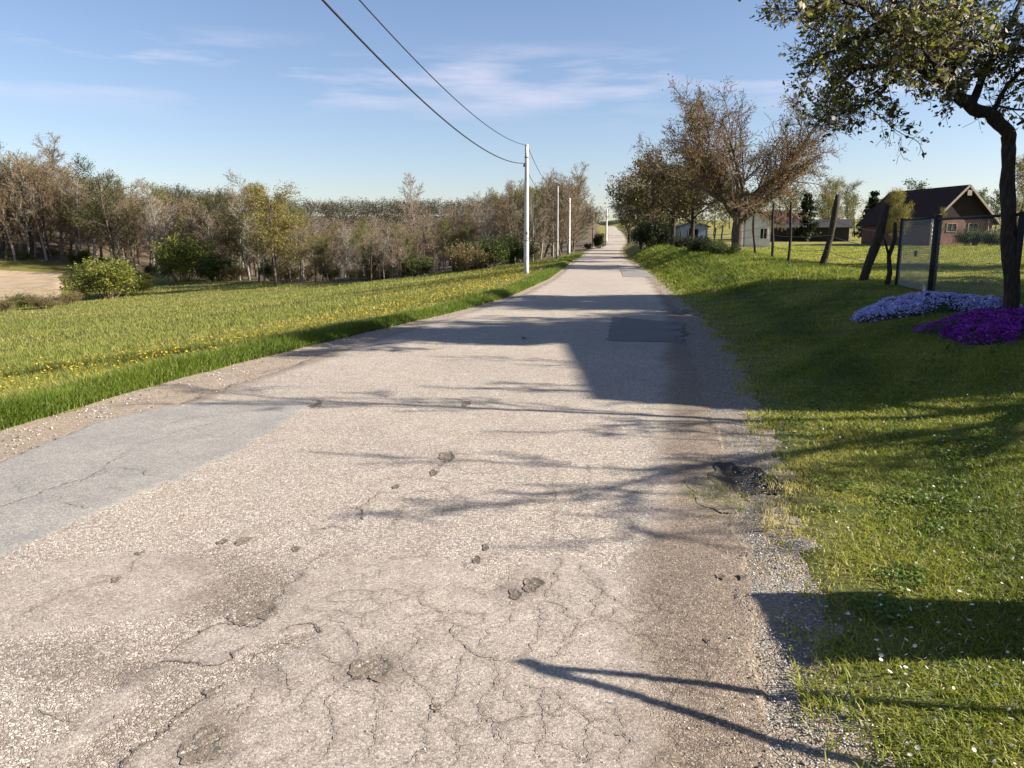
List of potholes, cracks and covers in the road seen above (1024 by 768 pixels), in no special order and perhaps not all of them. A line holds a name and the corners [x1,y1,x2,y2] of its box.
crack [120,684,258,768]
crack [162,547,787,768]
pothole [178,722,226,765]
pothole [348,653,395,683]
pothole [438,451,455,462]
pothole [523,577,546,592]
pothole [708,462,786,497]
pothole [228,599,278,625]
pothole [509,588,523,600]
